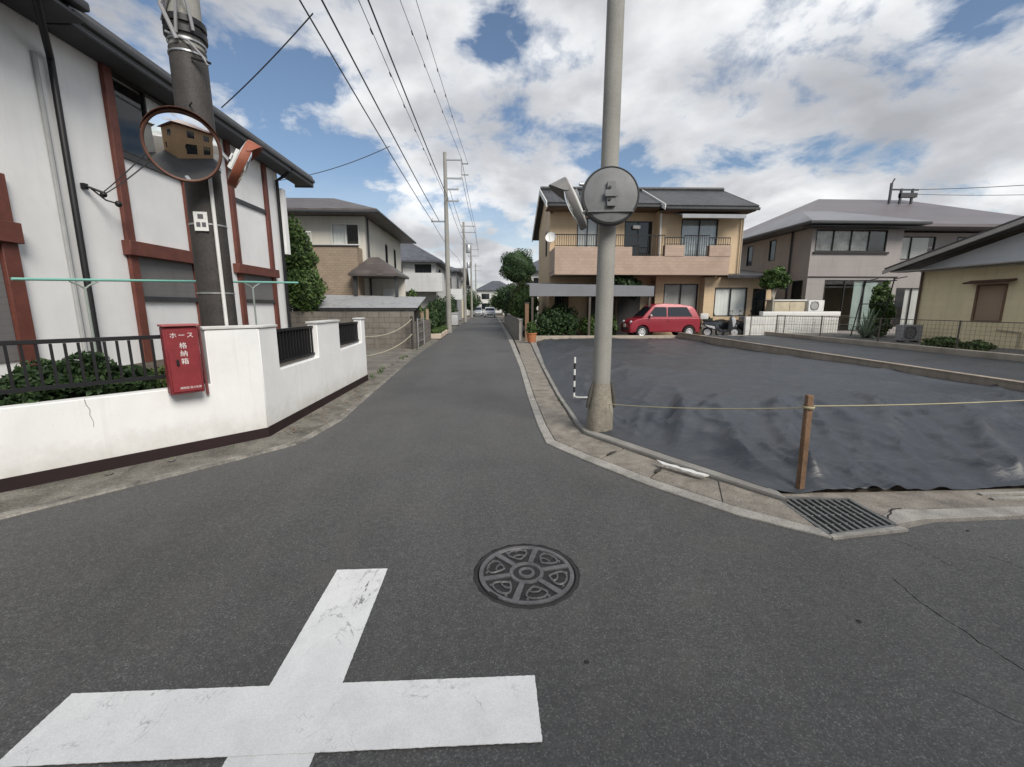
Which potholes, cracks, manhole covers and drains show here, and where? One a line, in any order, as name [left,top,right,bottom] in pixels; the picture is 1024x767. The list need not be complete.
drain grate [778,497,898,535]
manhole cover [473,544,580,610]
